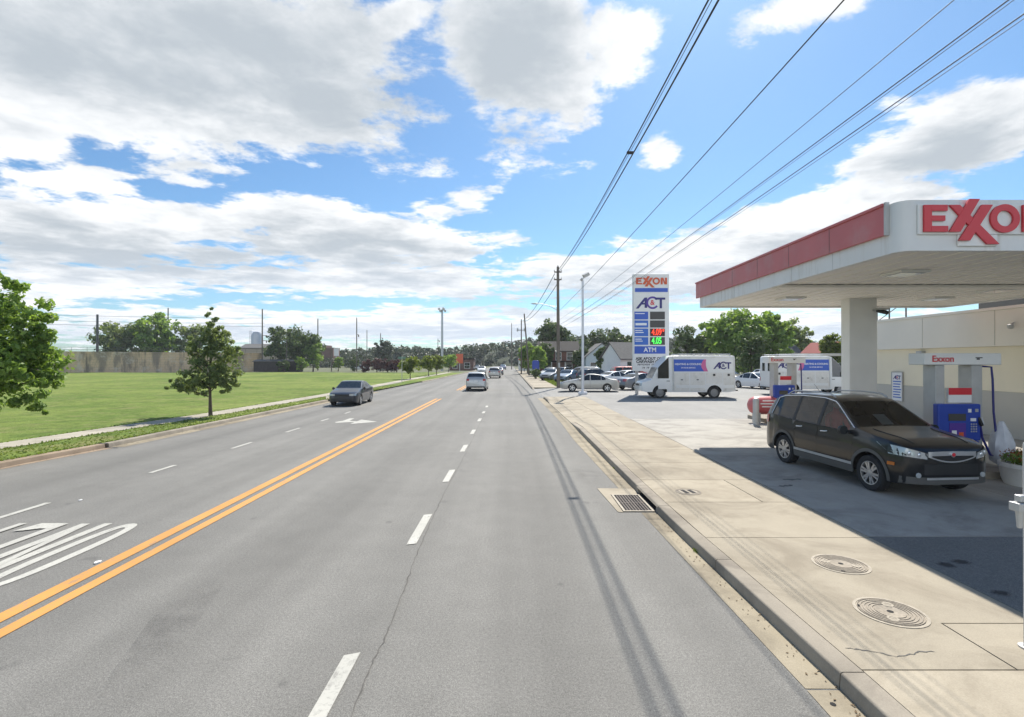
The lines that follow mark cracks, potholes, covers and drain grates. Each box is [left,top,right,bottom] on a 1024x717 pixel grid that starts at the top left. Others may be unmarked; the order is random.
crack [852,648,934,657]
manhole cover [811,554,872,575]
manhole cover [852,597,931,629]
drain grate [597,488,656,513]
